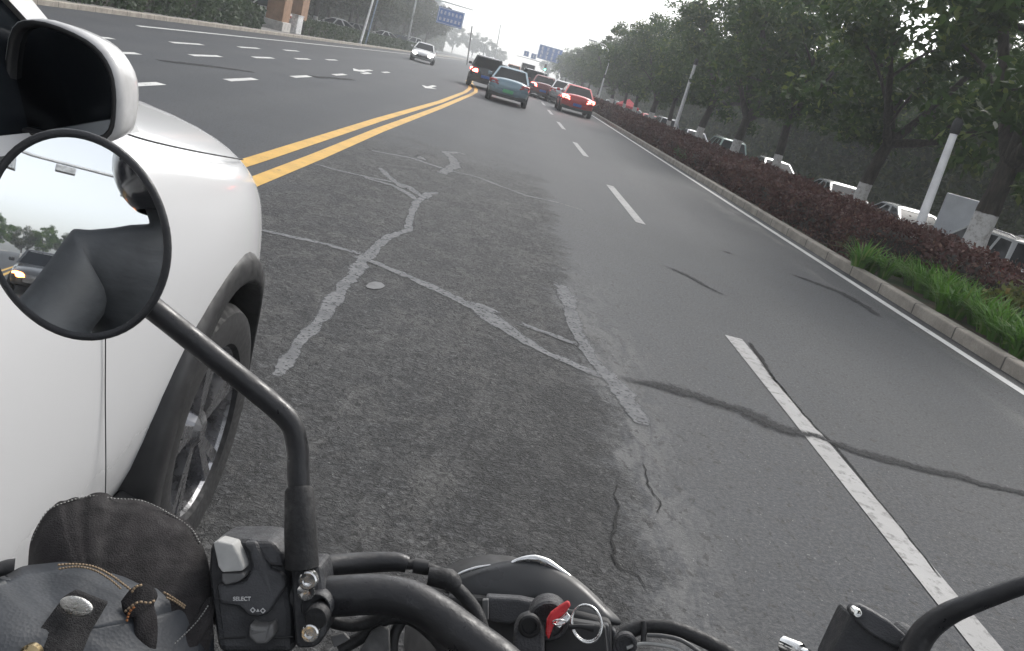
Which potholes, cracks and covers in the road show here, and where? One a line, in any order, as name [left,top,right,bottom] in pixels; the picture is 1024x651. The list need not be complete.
crack [610,343,1024,586]
